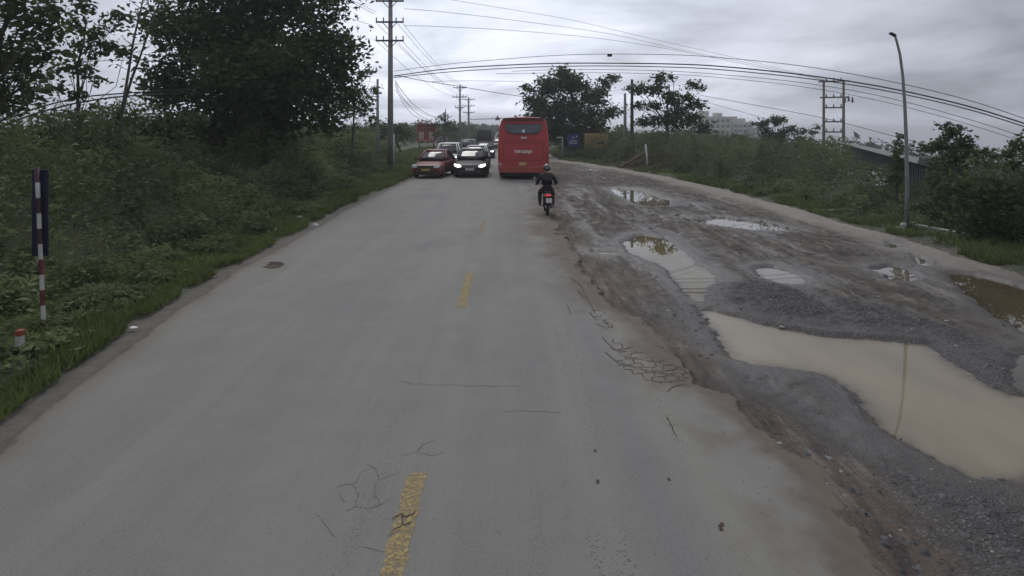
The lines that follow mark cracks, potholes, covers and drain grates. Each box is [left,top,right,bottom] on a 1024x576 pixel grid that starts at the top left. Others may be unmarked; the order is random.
pothole [618,232,725,303]
pothole [607,187,675,206]
pothole [688,303,1024,485]
pothole [674,213,795,232]
pothole [867,261,931,281]
pothole [939,269,1024,335]
crack [566,264,689,391]
pothole [749,263,815,285]
crack [316,441,444,551]
